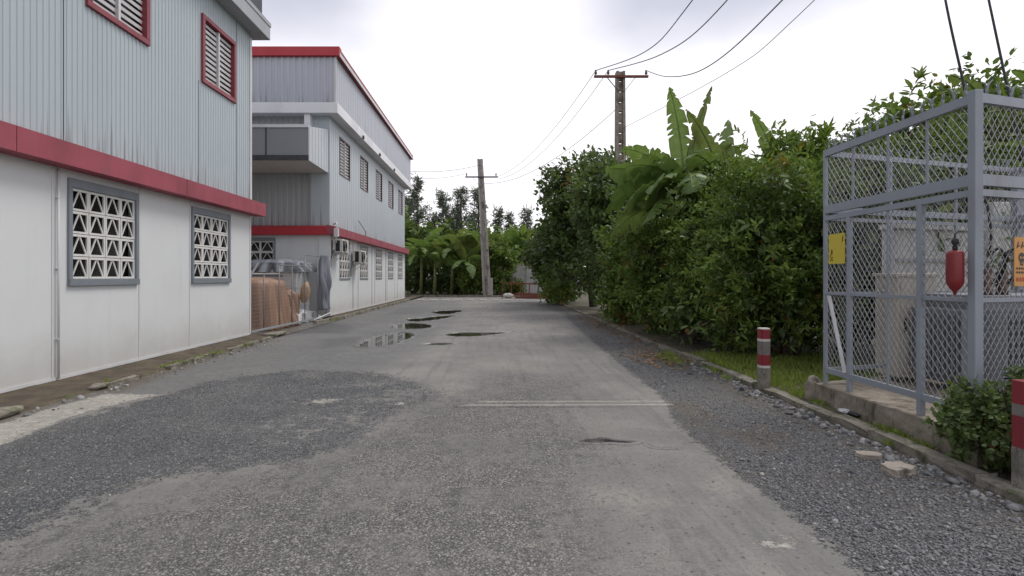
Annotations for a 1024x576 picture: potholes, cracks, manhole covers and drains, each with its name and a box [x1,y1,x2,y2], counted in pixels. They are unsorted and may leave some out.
pothole [355,332,418,348]
pothole [572,436,643,445]
